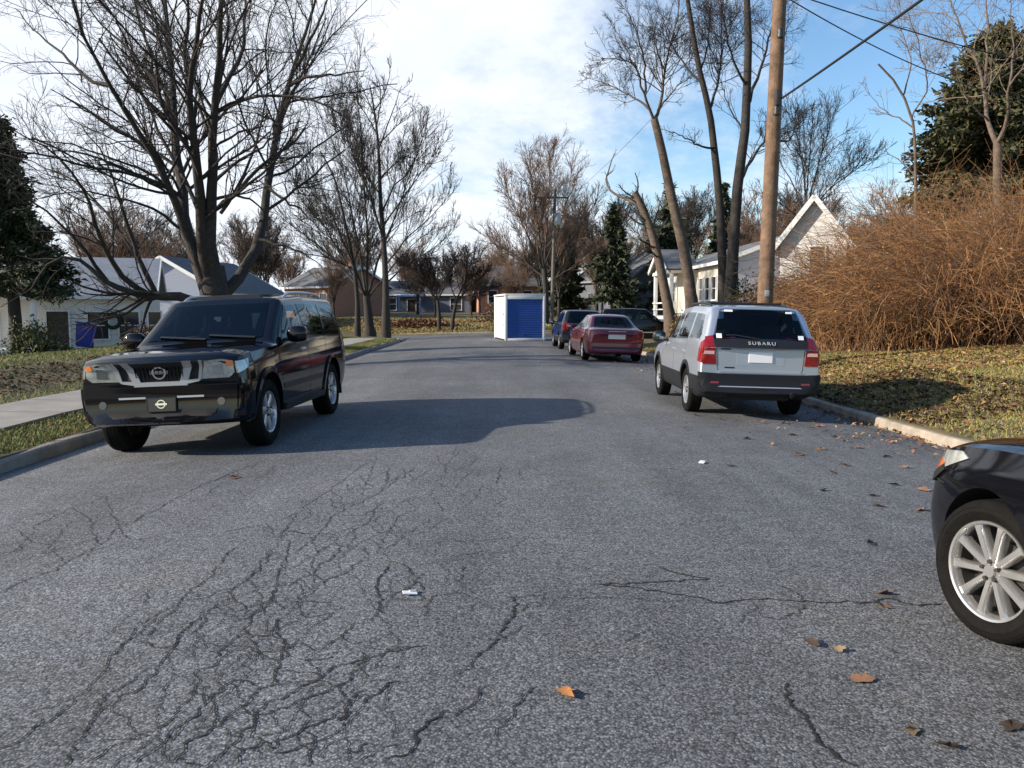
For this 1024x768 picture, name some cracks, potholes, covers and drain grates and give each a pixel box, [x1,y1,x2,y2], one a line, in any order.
crack [196,450,538,615]
crack [784,682,856,766]
crack [549,567,941,622]
crack [3,516,431,768]
crack [2,465,250,592]
crack [382,592,546,760]
